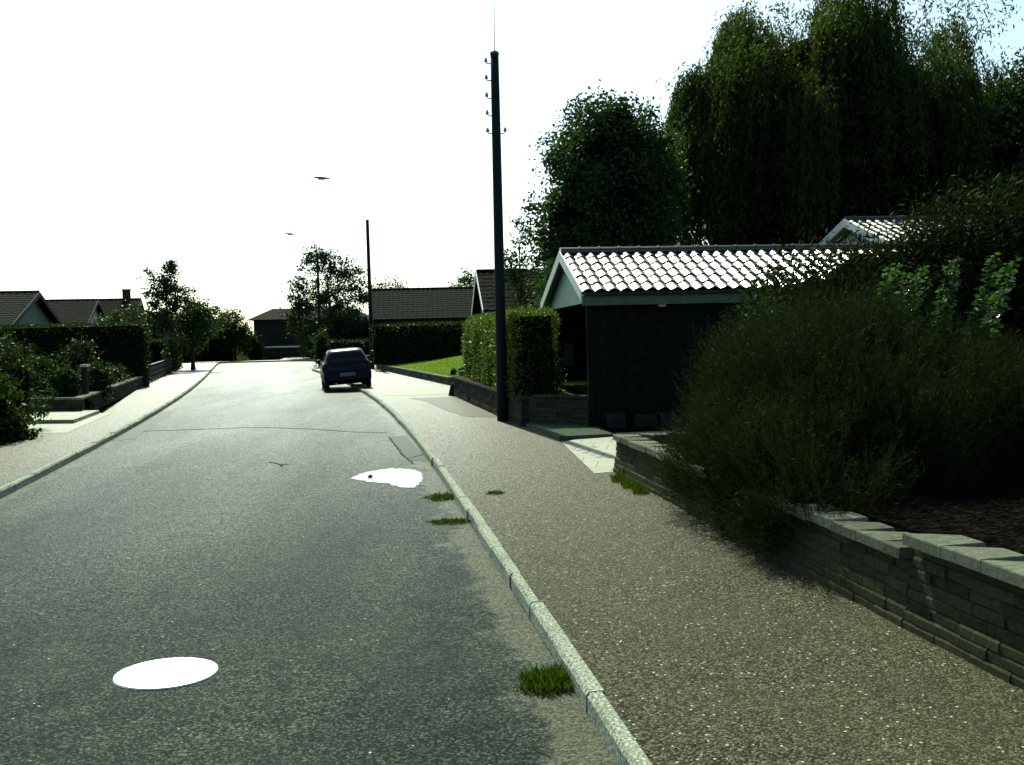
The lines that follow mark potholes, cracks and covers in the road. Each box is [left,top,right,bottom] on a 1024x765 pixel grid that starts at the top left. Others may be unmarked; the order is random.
crack [159,427,423,464]
manhole cover [112,657,219,690]
